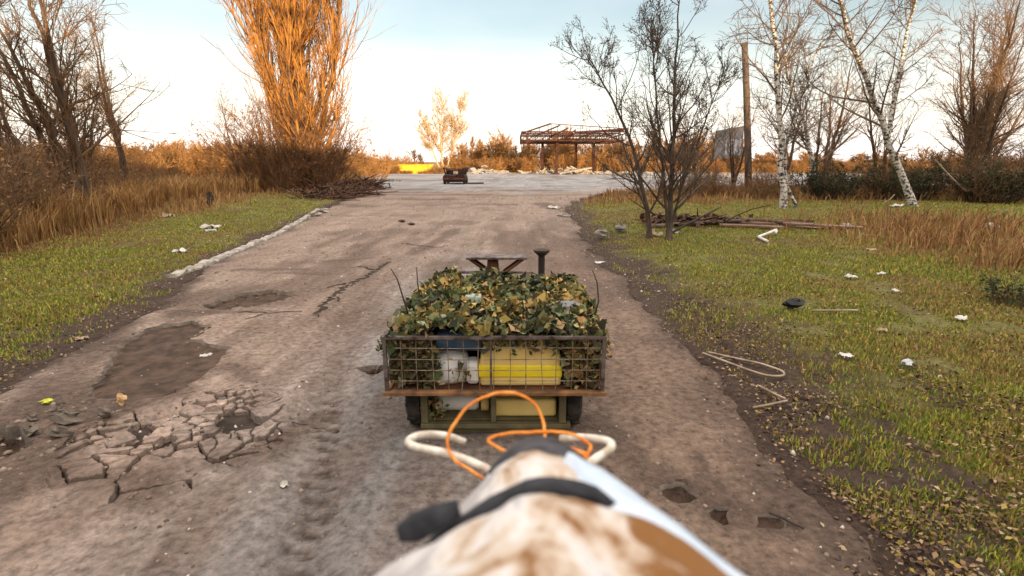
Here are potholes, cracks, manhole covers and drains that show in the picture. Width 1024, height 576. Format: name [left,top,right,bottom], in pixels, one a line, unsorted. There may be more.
pothole [690,495,758,533]
pothole [82,319,238,407]
crack [18,381,339,521]
pothole [348,363,389,380]
pothole [649,475,714,510]
crack [237,243,445,320]
pothole [195,288,305,312]
pothole [726,507,799,534]
